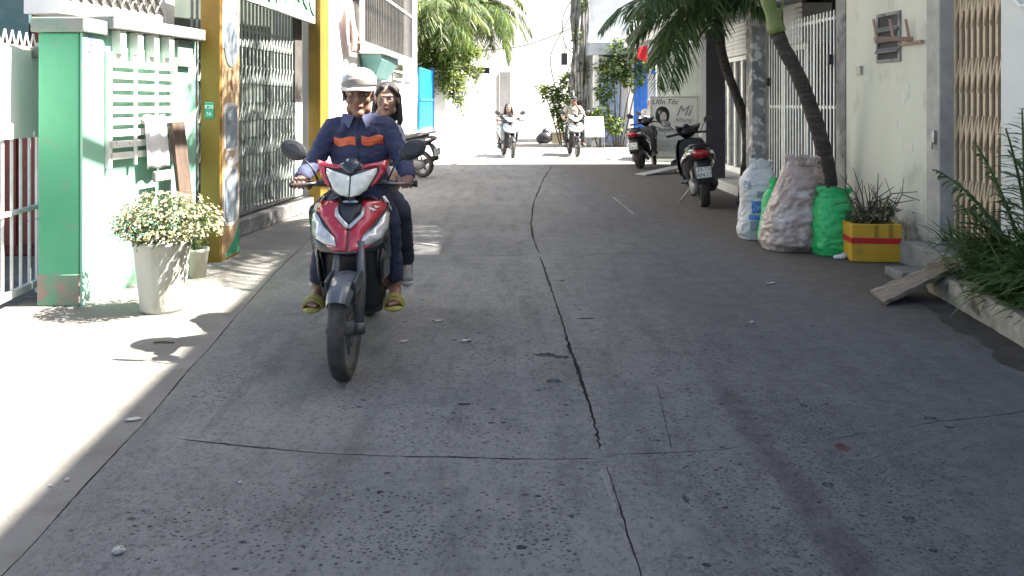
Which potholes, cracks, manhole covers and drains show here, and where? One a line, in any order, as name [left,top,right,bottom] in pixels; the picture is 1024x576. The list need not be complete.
crack [178,167,736,576]
